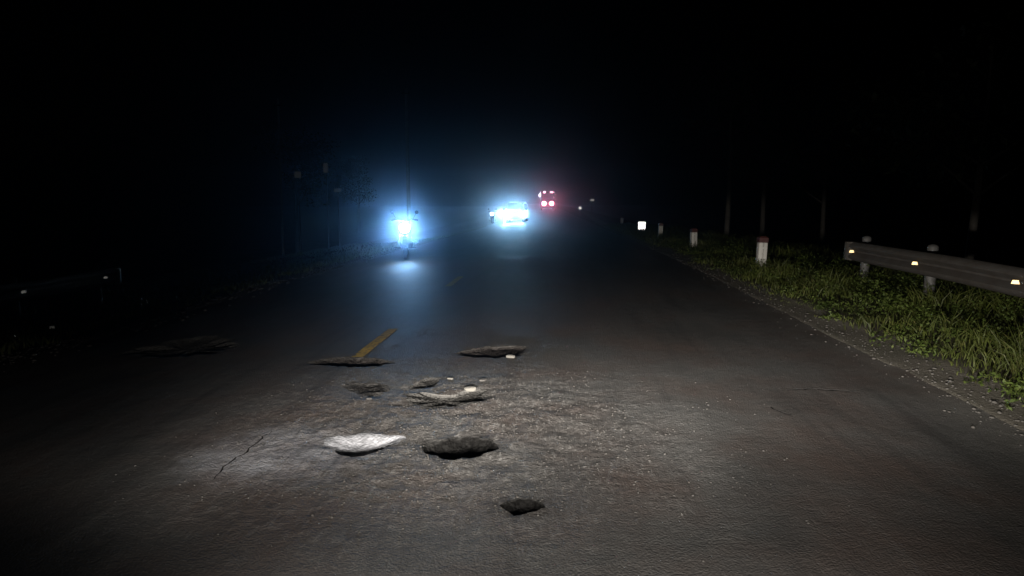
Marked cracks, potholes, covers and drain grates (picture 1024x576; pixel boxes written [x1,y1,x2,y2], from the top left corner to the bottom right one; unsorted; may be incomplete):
pothole [121,335,241,358]
crack [214,431,272,479]
pothole [403,388,492,409]
pothole [455,346,528,358]
pothole [322,433,406,457]
crack [770,388,863,415]
pothole [422,436,499,460]
pothole [344,382,390,397]
pothole [499,499,546,516]
pothole [408,377,440,389]
pothole [308,357,395,368]
